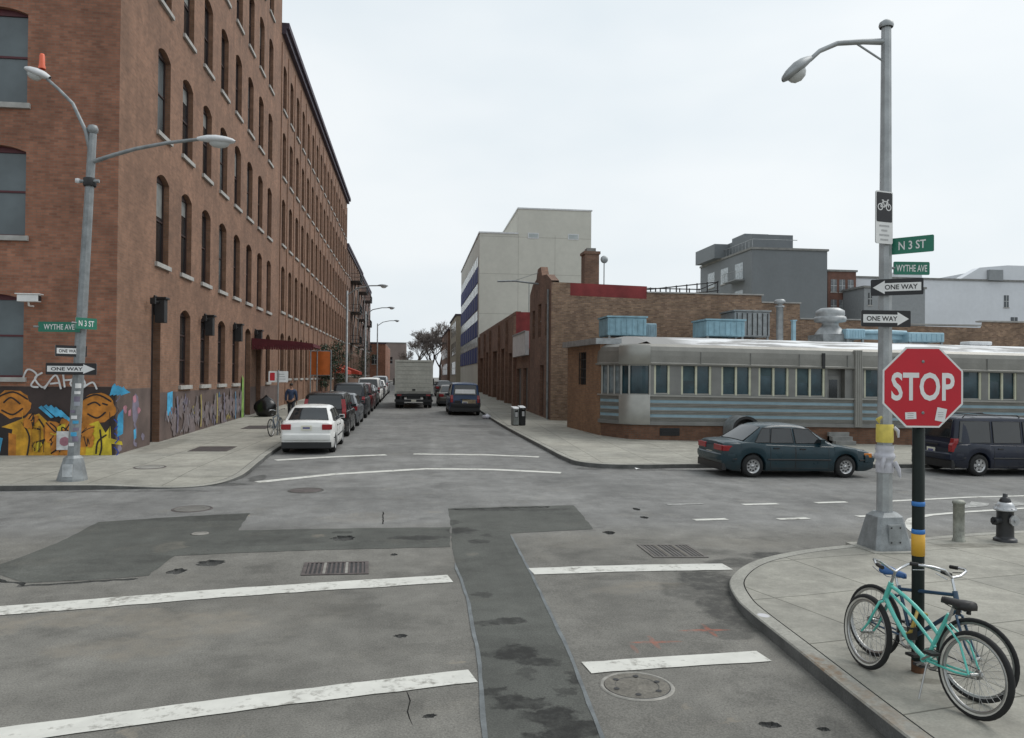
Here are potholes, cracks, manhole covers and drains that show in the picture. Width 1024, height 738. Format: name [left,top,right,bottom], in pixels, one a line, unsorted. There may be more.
drain grate [637,544,709,558]
drain grate [301,561,369,576]
manhole cover [599,672,675,701]
